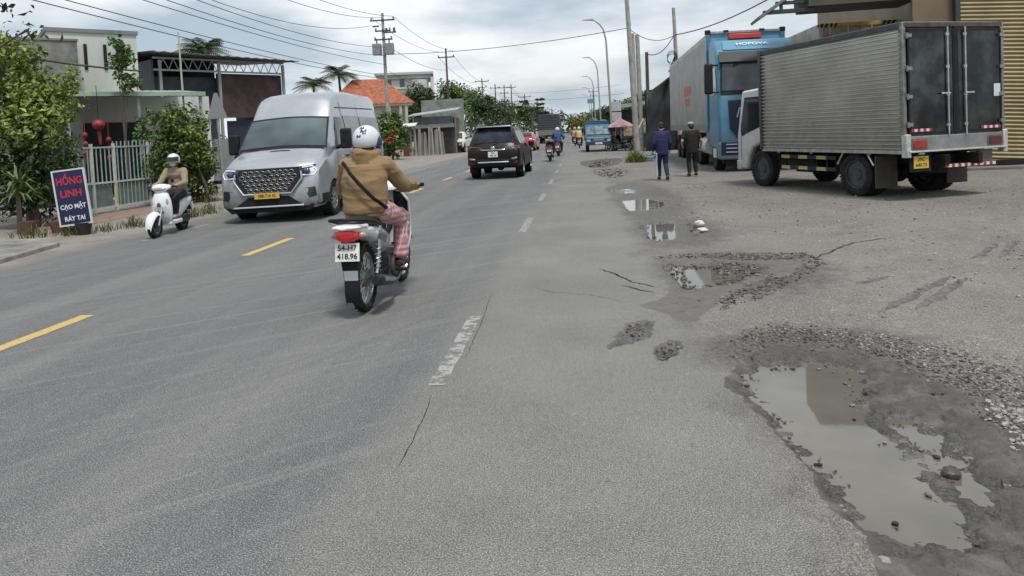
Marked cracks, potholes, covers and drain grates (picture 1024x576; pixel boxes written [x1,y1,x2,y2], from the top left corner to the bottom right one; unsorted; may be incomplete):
pothole [580,158,623,168]
pothole [652,339,684,361]
pothole [604,186,656,195]
crack [393,397,431,473]
pothole [616,196,678,212]
pothole [591,168,633,178]
pothole [634,219,711,241]
crack [533,268,653,302]
pothole [723,343,1024,576]
crack [812,237,890,260]
pothole [606,319,656,350]
pothole [640,257,807,323]
